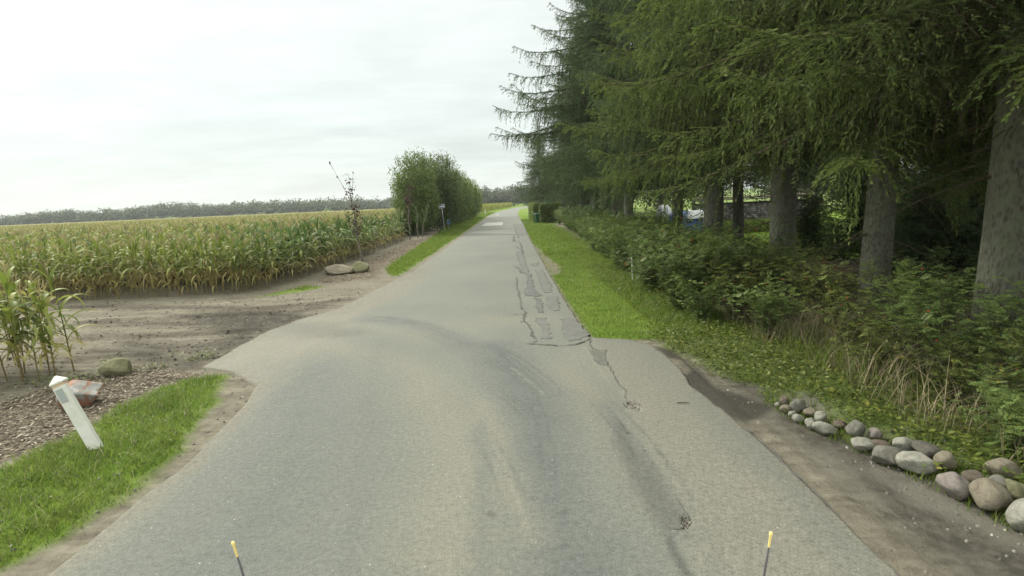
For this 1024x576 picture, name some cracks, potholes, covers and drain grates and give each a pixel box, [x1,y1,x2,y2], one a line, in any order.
crack [481,234,627,399]
pothole [624,400,644,411]
